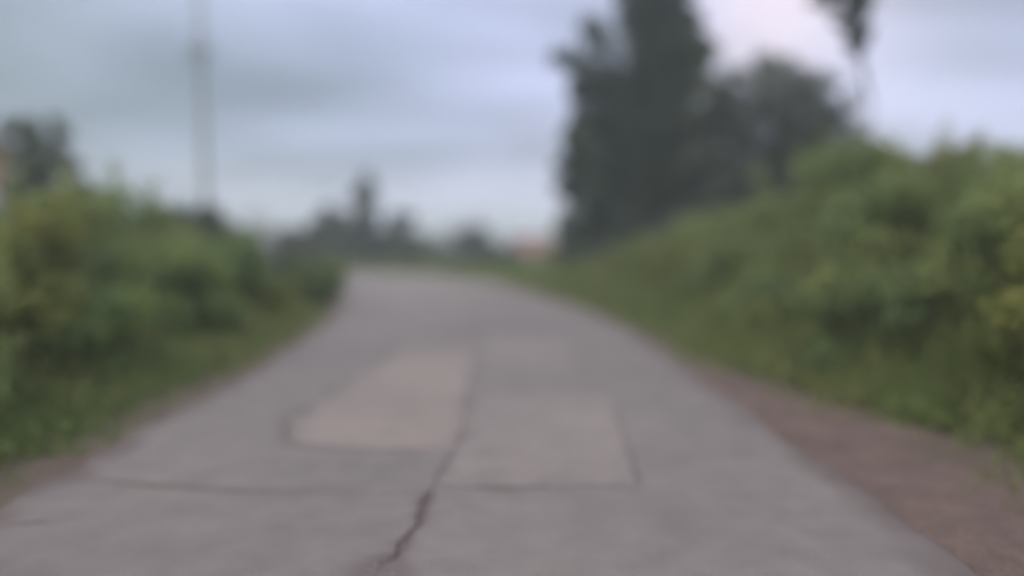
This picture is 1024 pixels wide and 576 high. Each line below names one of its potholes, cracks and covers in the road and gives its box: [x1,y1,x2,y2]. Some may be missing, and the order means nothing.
crack [88,308,642,576]
